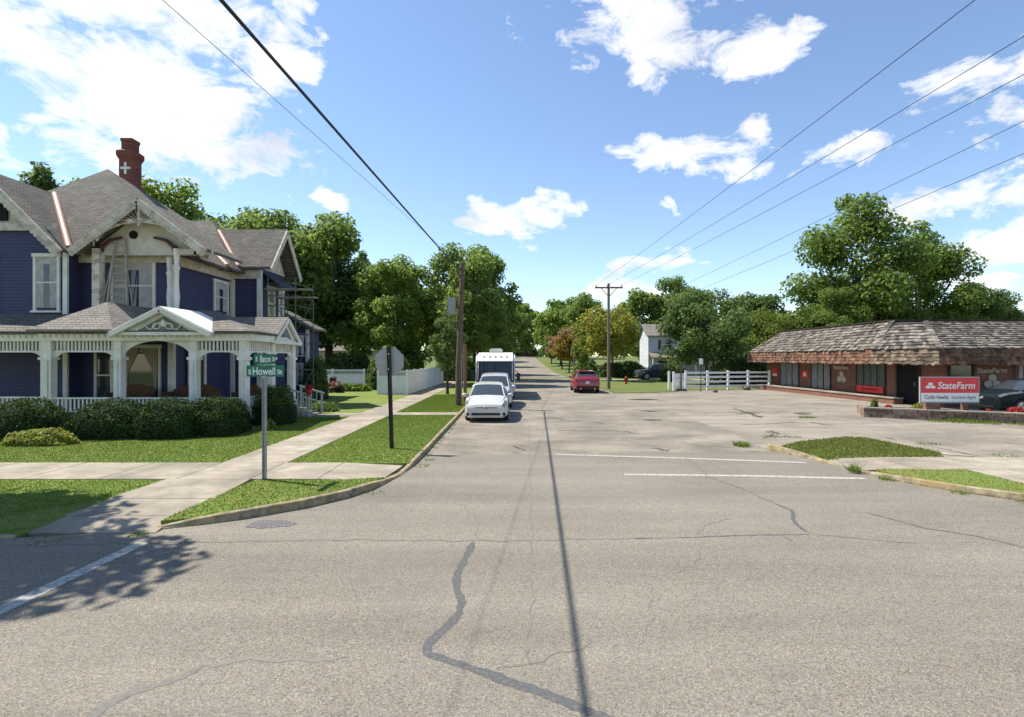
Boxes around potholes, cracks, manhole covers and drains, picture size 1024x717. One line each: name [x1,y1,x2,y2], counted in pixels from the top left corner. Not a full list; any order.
crack [676,519,727,574]
crack [735,409,835,452]
crack [639,585,655,645]
